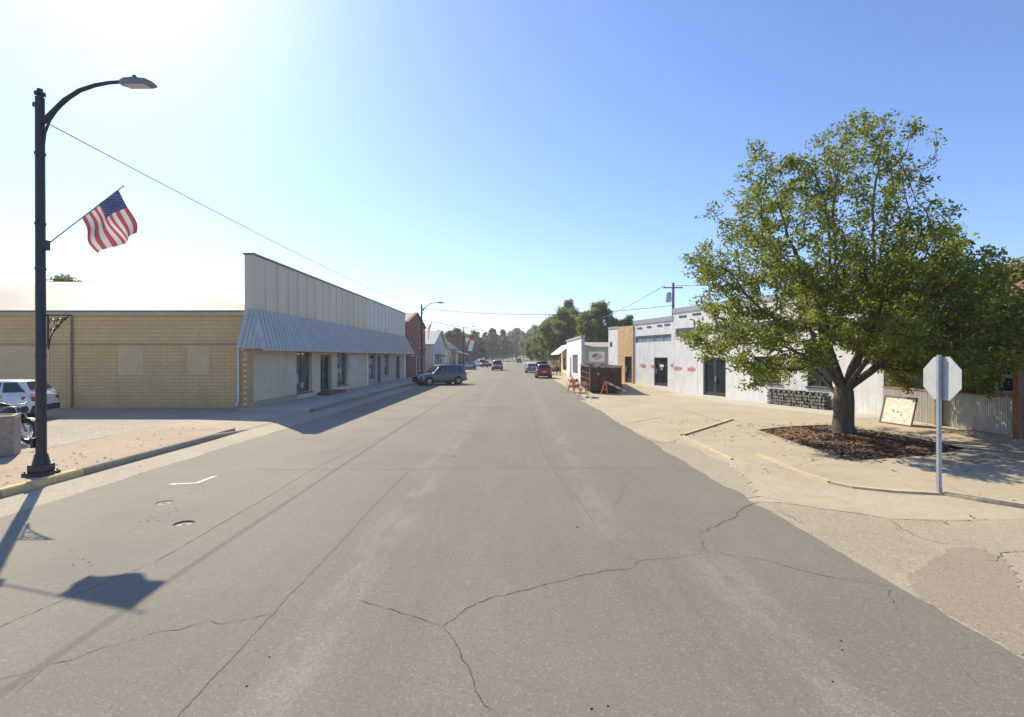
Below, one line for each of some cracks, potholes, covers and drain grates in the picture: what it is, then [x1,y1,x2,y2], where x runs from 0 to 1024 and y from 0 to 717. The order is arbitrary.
crack [0,612,278,689]
crack [444,503,883,709]
